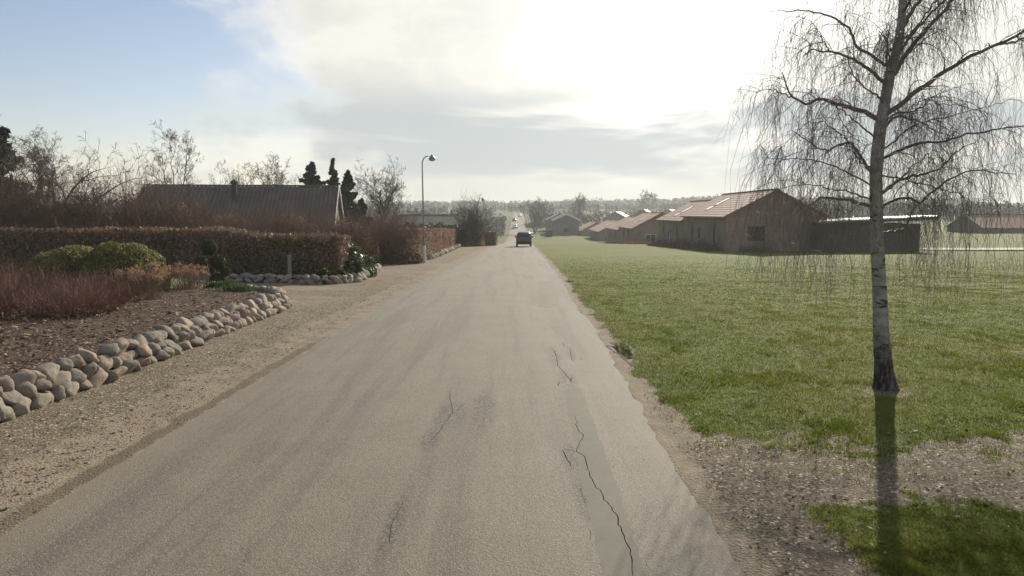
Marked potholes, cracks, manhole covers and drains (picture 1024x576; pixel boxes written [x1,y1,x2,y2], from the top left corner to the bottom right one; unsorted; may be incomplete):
crack [562,417,633,575]
